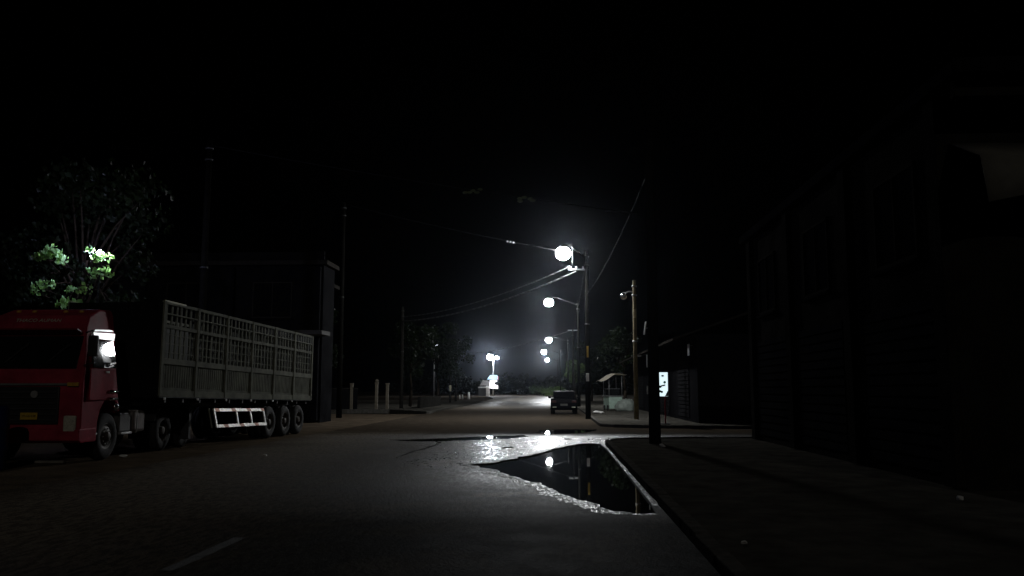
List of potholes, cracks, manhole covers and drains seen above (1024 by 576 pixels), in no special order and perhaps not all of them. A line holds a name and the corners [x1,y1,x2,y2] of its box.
pothole [463,443,658,515]
crack [396,442,441,458]
